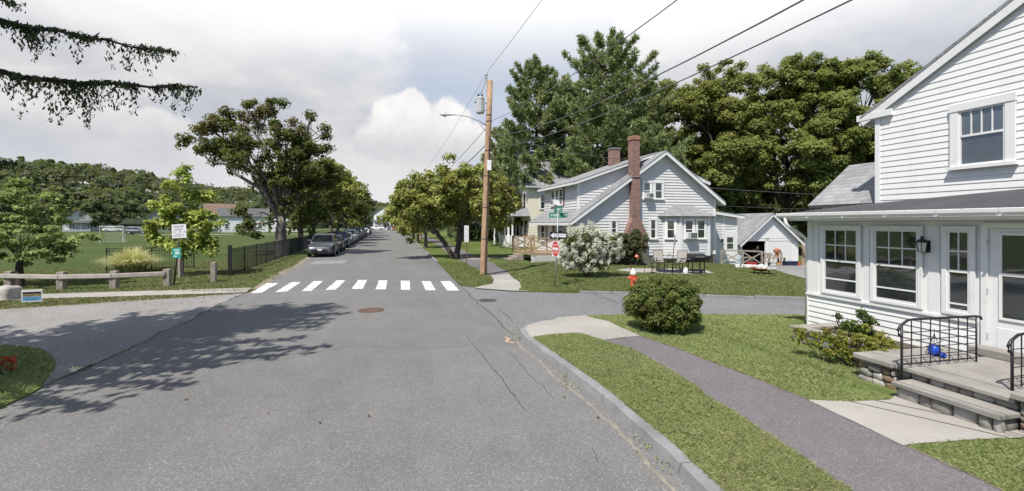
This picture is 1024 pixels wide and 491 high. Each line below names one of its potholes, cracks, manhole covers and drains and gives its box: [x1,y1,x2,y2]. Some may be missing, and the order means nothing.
crack [262,335,554,437]
